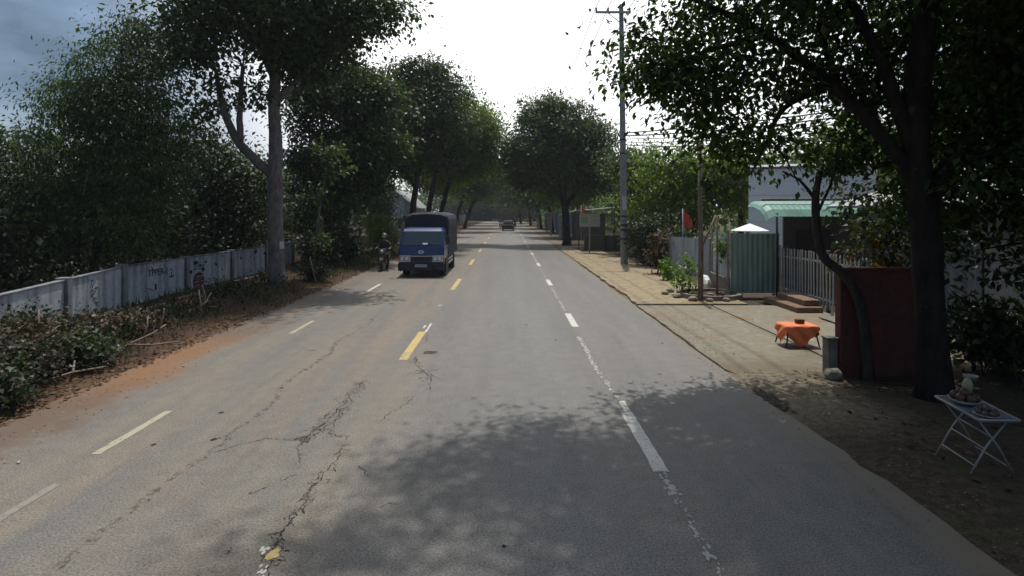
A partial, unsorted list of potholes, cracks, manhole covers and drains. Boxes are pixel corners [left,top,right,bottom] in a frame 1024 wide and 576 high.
crack [384,350,438,420]
crack [216,381,371,576]
pothole [751,386,798,414]
